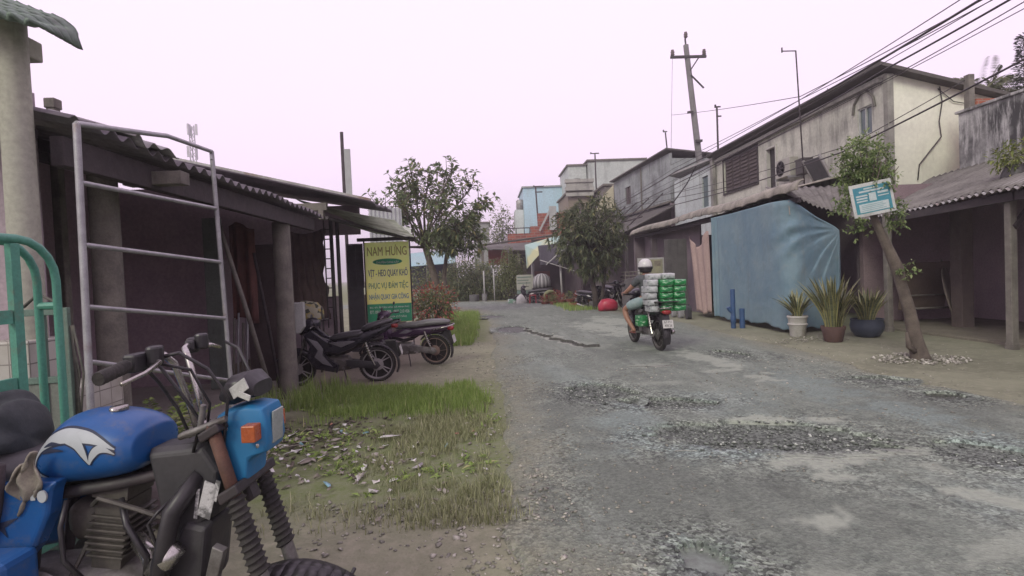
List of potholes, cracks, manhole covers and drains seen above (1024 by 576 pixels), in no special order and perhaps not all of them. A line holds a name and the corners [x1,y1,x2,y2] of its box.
pothole [910,389,982,403]
pothole [604,395,732,411]
pothole [553,381,650,408]
pothole [705,349,758,359]
pothole [909,435,1024,473]
pothole [626,418,922,458]
pothole [839,374,925,386]
pothole [654,532,759,576]
